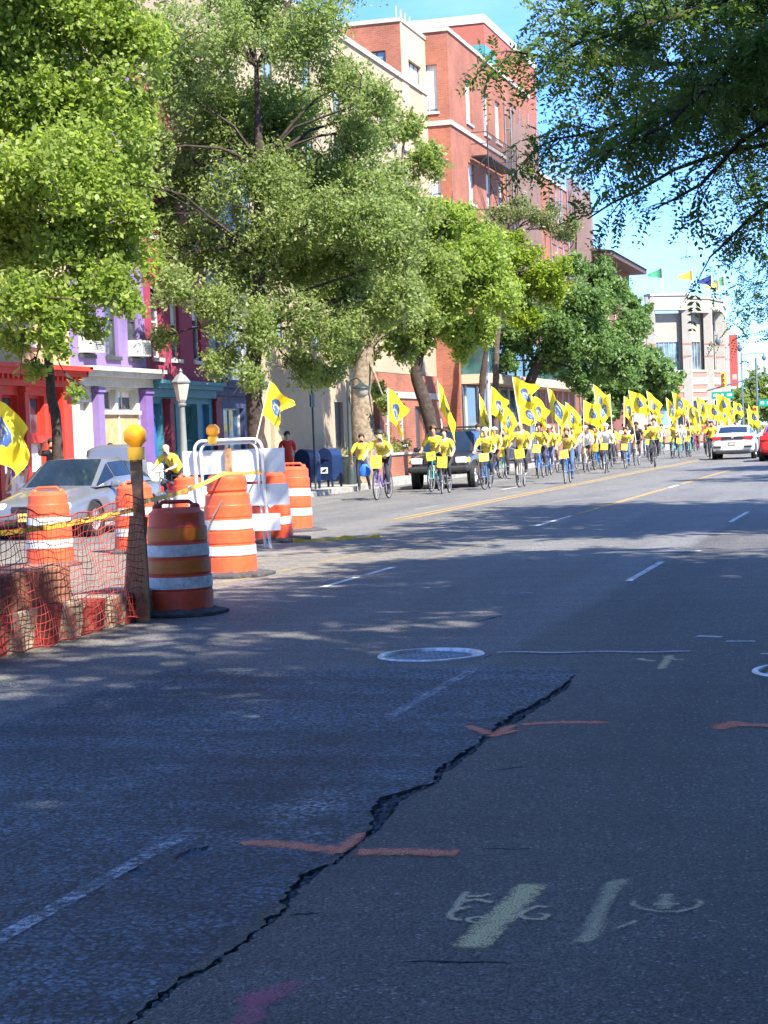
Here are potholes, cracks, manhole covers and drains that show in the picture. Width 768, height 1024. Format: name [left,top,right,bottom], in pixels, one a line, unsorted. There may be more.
manhole cover [377,647,484,662]
manhole cover [752,665,768,676]
crack [127,654,576,1024]
